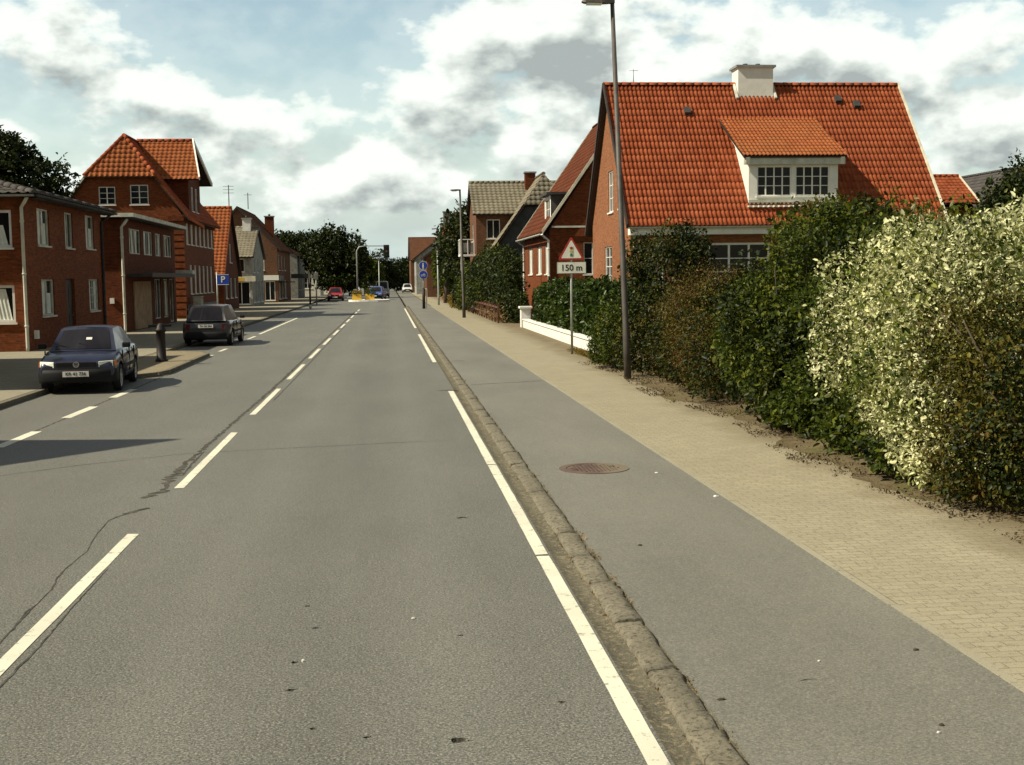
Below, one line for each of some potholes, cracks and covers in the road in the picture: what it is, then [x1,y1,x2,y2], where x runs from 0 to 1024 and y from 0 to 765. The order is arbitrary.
crack [0,507,150,687]
manhole cover [559,463,629,474]
